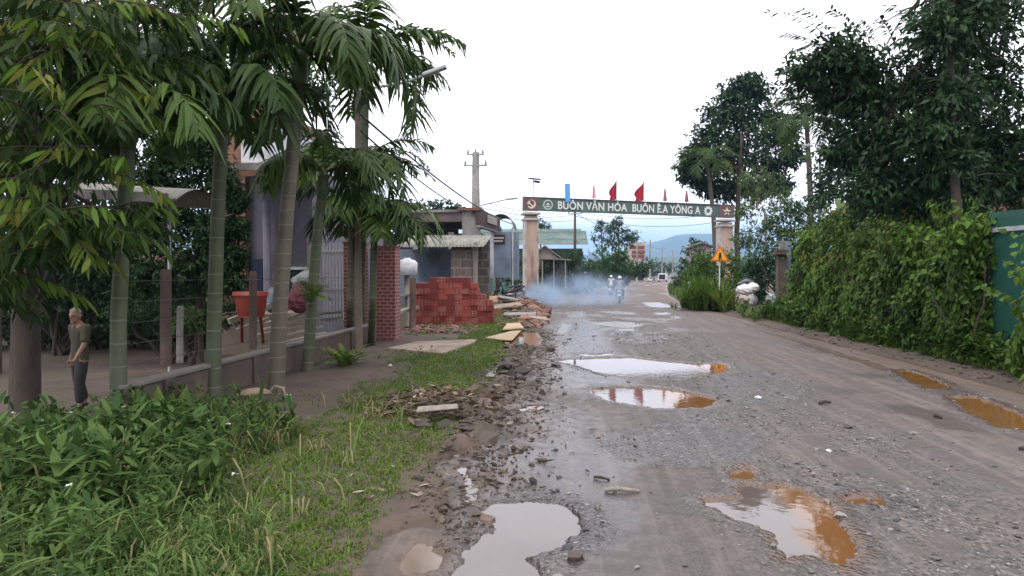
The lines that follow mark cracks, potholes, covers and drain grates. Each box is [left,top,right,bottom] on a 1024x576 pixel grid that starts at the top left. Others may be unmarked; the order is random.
pothole [715,462,776,487]
pothole [545,356,739,381]
pothole [577,384,729,411]
pothole [686,478,892,576]
pothole [937,394,1024,435]
pothole [886,368,964,391]
pothole [445,490,607,576]
